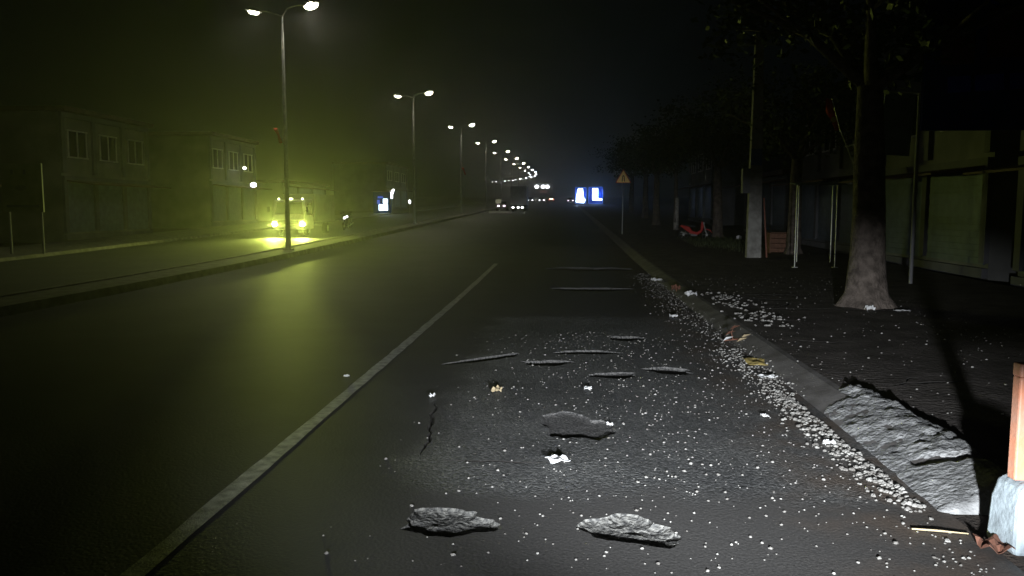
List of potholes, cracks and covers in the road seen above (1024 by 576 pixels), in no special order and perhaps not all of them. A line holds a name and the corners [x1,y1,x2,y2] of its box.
pothole [401,508,500,538]
pothole [541,411,617,441]
pothole [575,513,681,549]
